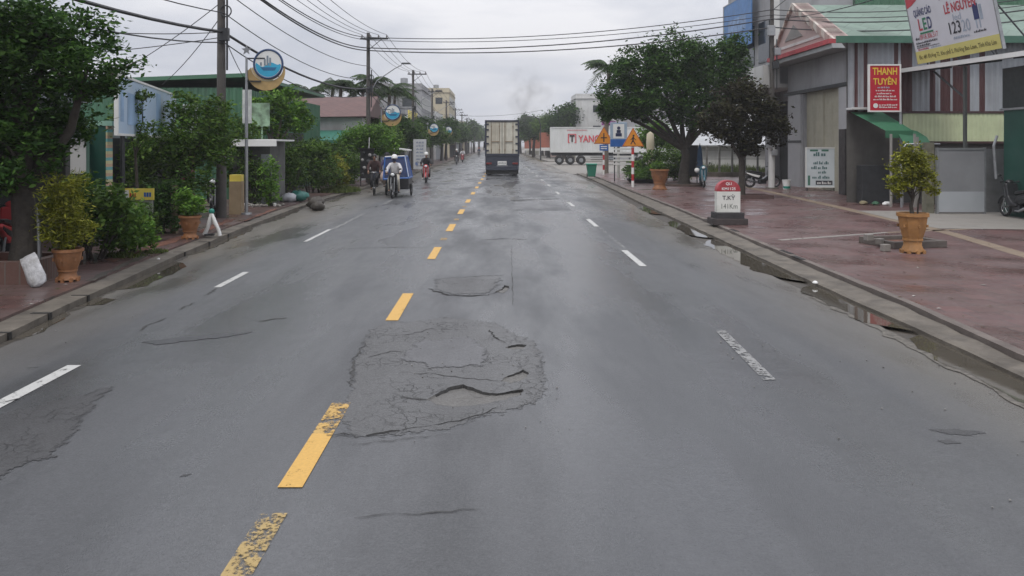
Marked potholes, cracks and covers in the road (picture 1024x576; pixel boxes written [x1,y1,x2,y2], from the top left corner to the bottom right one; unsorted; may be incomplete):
crack [332,407,496,444]
crack [354,509,460,518]
crack [348,328,433,385]
